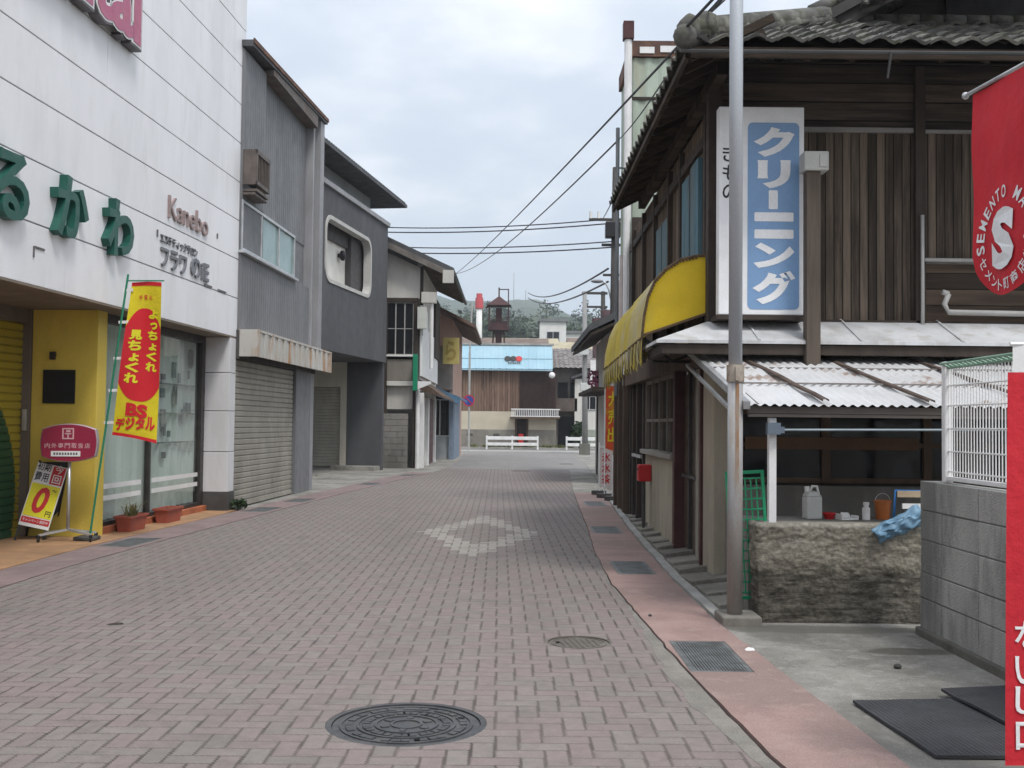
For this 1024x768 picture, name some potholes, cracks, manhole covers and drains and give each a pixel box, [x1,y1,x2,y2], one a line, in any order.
manhole cover [546,636,612,649]
drain grate [609,561,657,575]
drain grate [589,526,624,534]
drain grate [669,641,753,672]
drain grate [100,538,163,547]
manhole cover [325,703,486,747]
